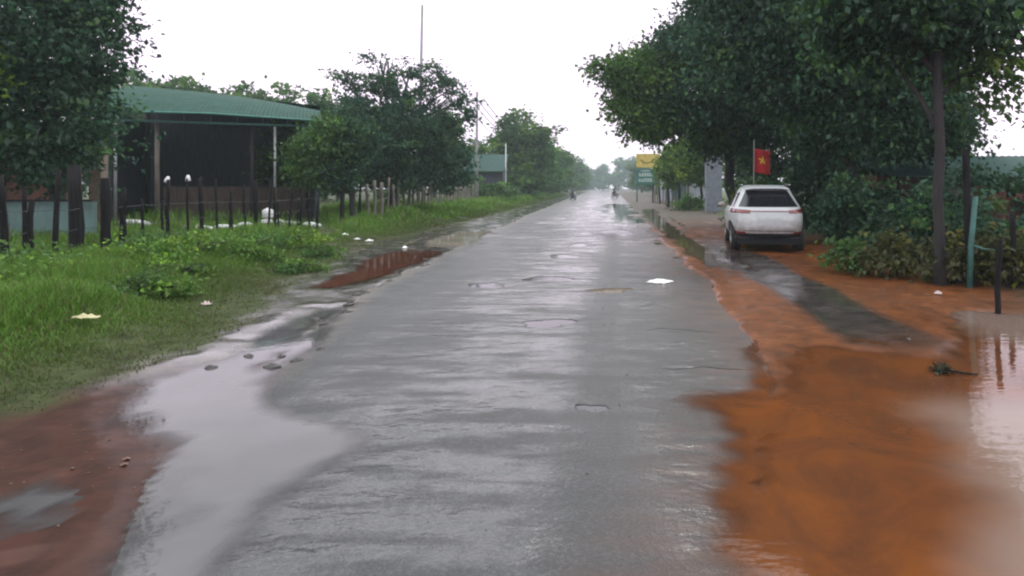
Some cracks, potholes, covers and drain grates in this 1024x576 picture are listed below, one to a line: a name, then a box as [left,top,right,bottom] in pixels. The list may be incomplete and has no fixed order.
pothole [575,404,610,412]
pothole [523,319,578,328]
